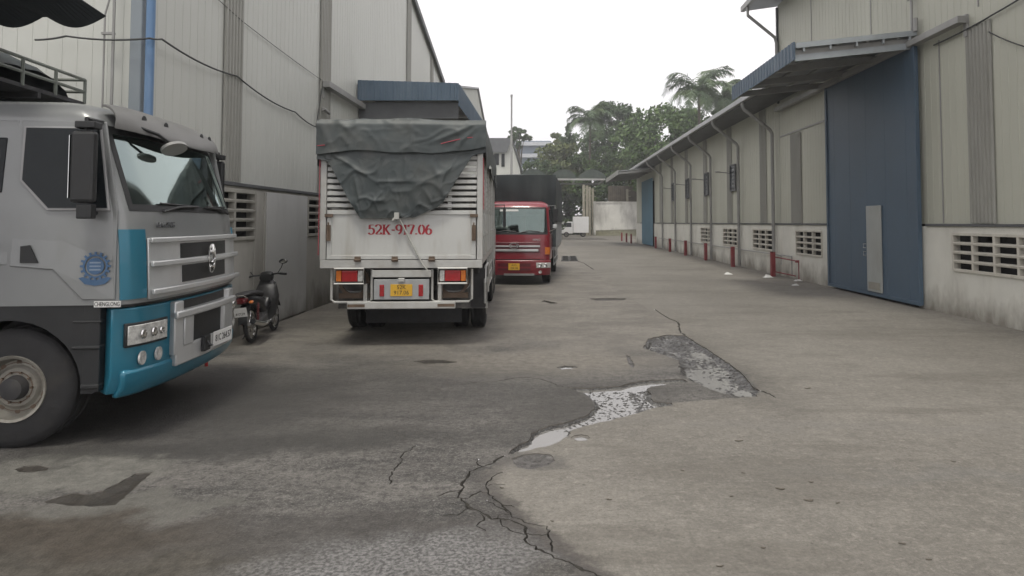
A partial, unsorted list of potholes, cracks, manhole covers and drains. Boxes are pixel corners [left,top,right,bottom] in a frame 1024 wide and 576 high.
crack [389,446,415,485]
pothole [643,335,760,397]
crack [439,455,600,576]
pothole [509,379,687,454]
